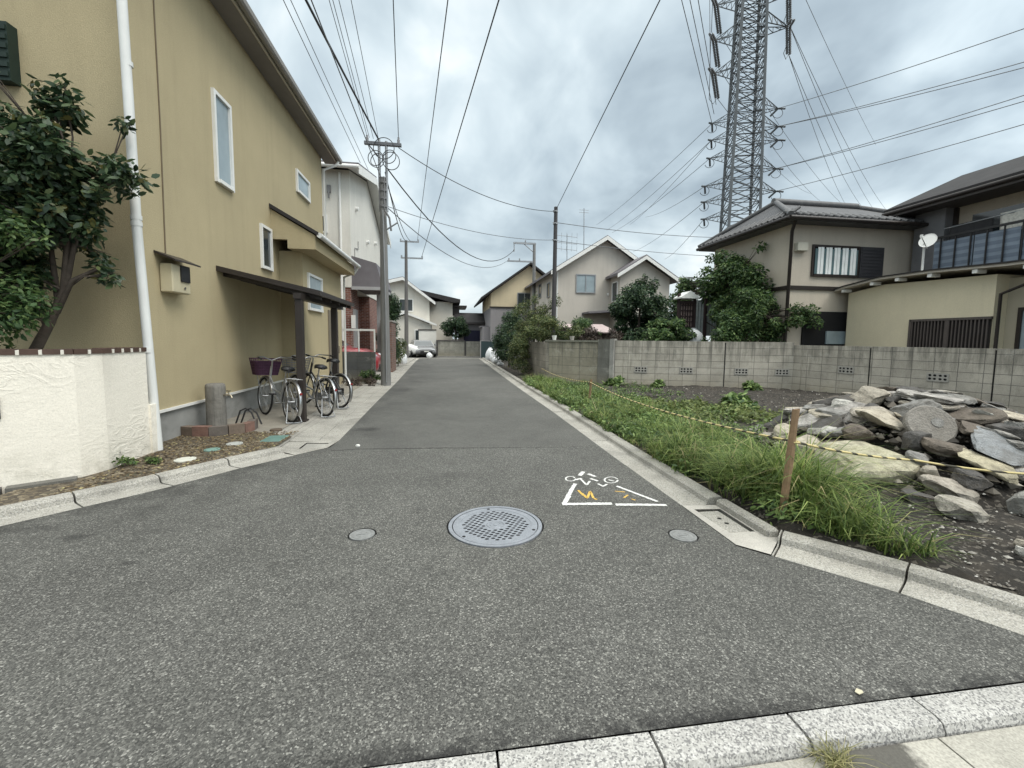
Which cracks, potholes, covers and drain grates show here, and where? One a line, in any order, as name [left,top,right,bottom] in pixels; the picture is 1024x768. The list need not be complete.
utility cover [668,530,699,542]
utility cover [347,529,377,541]
manhole cover [446,506,544,548]
